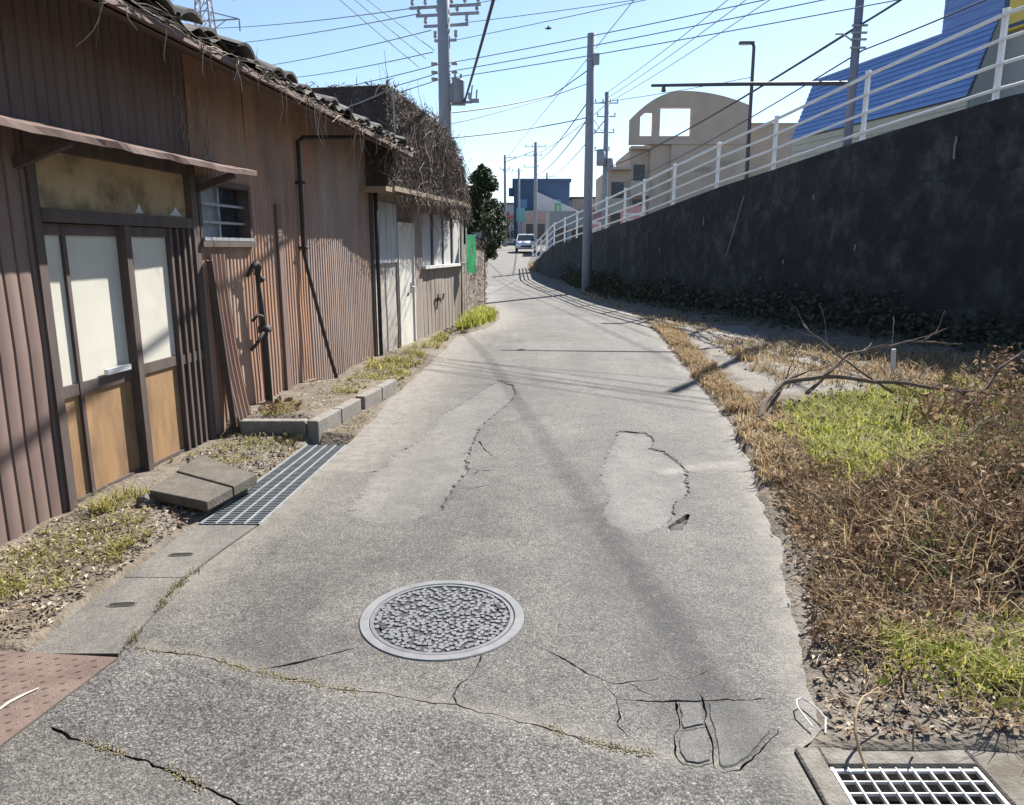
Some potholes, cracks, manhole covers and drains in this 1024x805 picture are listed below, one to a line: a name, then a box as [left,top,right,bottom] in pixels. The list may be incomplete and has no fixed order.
crack [137,642,779,773]
drain grate [794,748,1024,805]
crack [51,726,241,805]
drain grate [199,444,347,527]
manhole cover [359,580,524,662]
